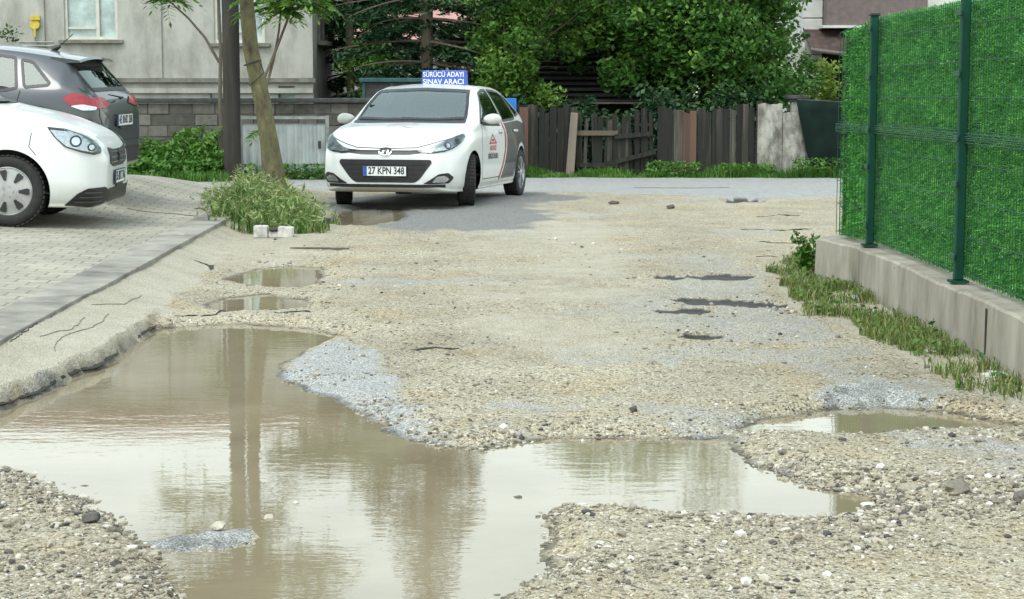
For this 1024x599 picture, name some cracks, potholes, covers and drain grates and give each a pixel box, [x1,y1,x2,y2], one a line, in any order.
pothole [329,204,412,226]
pothole [195,290,321,311]
pothole [217,261,334,288]
crack [0,296,141,406]
pothole [0,315,897,599]
pothole [719,401,1024,437]
